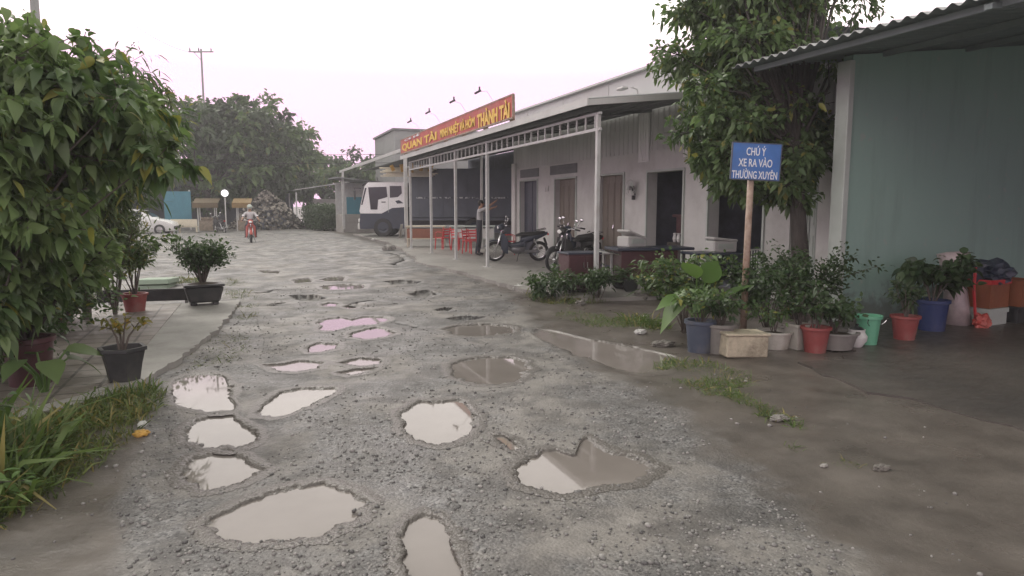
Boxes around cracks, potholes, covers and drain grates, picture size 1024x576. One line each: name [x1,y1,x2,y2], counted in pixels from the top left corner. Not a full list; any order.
pothole [252,358,335,374]
pothole [499,433,672,500]
pothole [245,384,347,421]
pothole [386,507,472,576]
pothole [185,477,384,552]
pothole [157,369,246,416]
pothole [168,410,269,455]
pothole [401,289,446,299]
pothole [432,322,525,338]
pothole [387,396,489,450]
pothole [297,340,348,355]
pothole [440,354,542,388]
